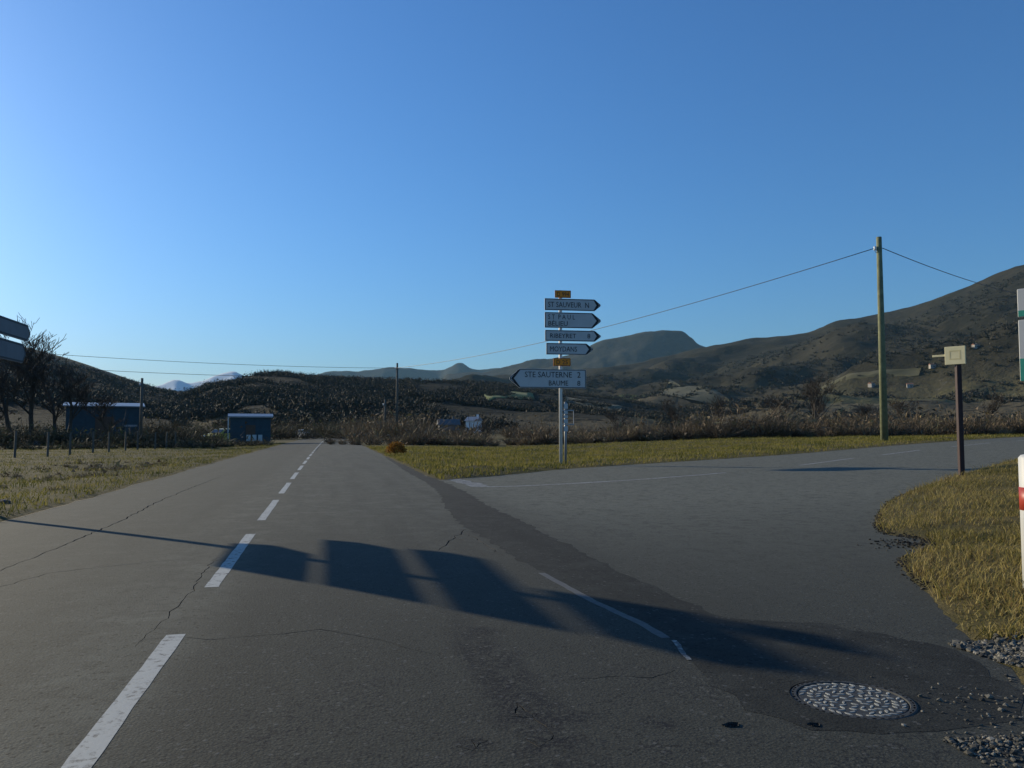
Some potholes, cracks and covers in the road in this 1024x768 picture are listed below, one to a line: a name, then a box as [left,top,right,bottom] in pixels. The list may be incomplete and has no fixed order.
manhole cover [790,680,918,734]
crack [511,703,554,747]
crack [141,629,417,651]
crack [142,560,214,640]
